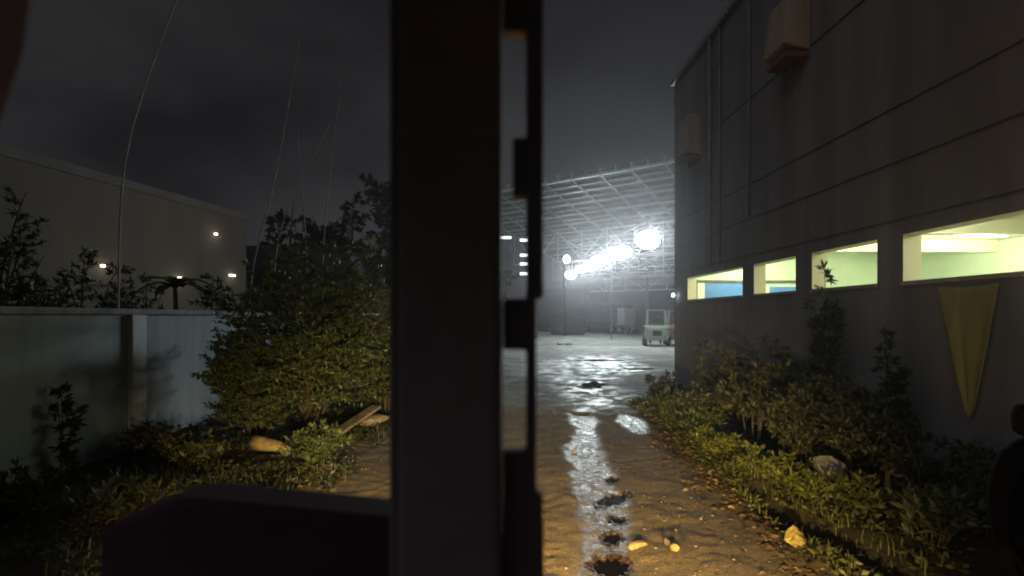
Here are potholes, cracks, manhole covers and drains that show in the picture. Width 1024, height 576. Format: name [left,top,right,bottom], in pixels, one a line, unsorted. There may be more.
pothole [607,515,628,526]
pothole [583,552,635,576]
pothole [599,530,627,546]
pothole [576,380,609,389]
pothole [592,490,634,510]
